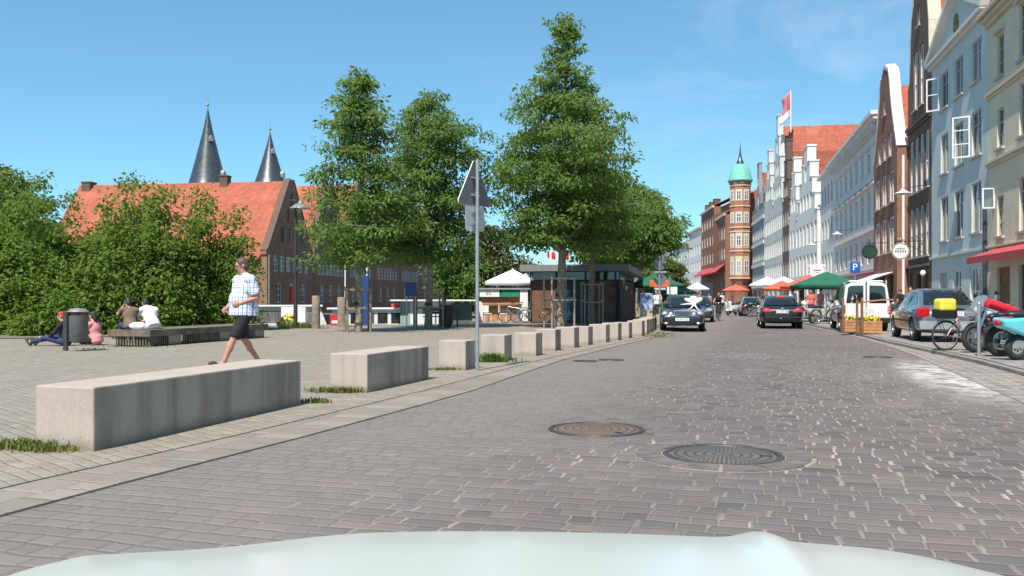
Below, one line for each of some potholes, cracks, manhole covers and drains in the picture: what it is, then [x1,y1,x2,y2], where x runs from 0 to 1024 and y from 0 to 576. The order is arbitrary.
manhole cover [548,422,645,437]
manhole cover [633,440,817,473]
